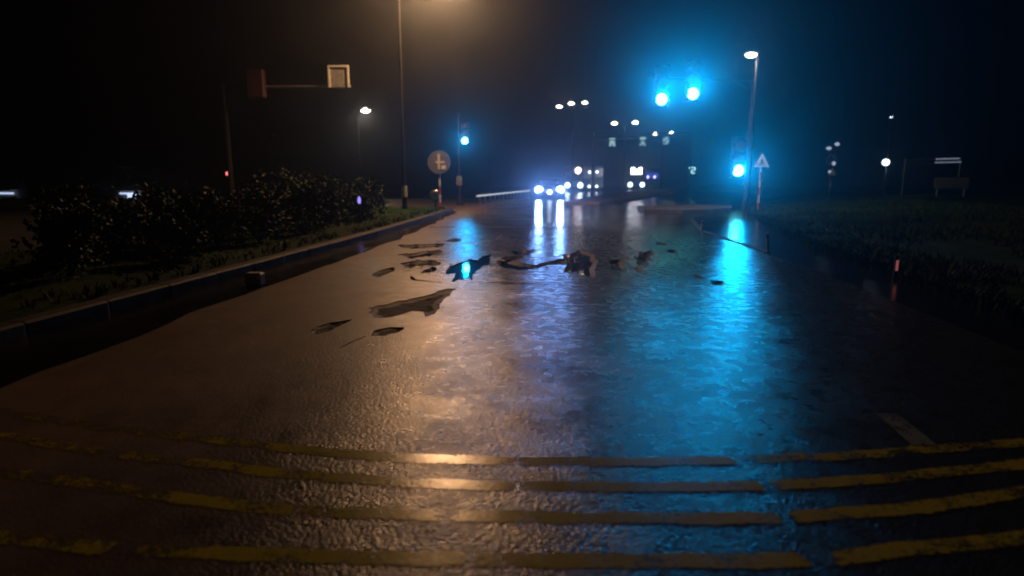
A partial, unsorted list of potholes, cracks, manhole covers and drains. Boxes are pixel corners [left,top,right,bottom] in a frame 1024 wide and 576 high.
pothole [400,260,441,269]
pothole [562,250,598,277]
pothole [310,319,352,334]
pothole [633,248,654,273]
pothole [371,327,404,336]
pothole [369,288,455,318]
pothole [396,250,443,259]
pothole [444,254,491,284]
pothole [496,258,568,270]
pothole [372,268,395,277]
pothole [609,259,625,271]
